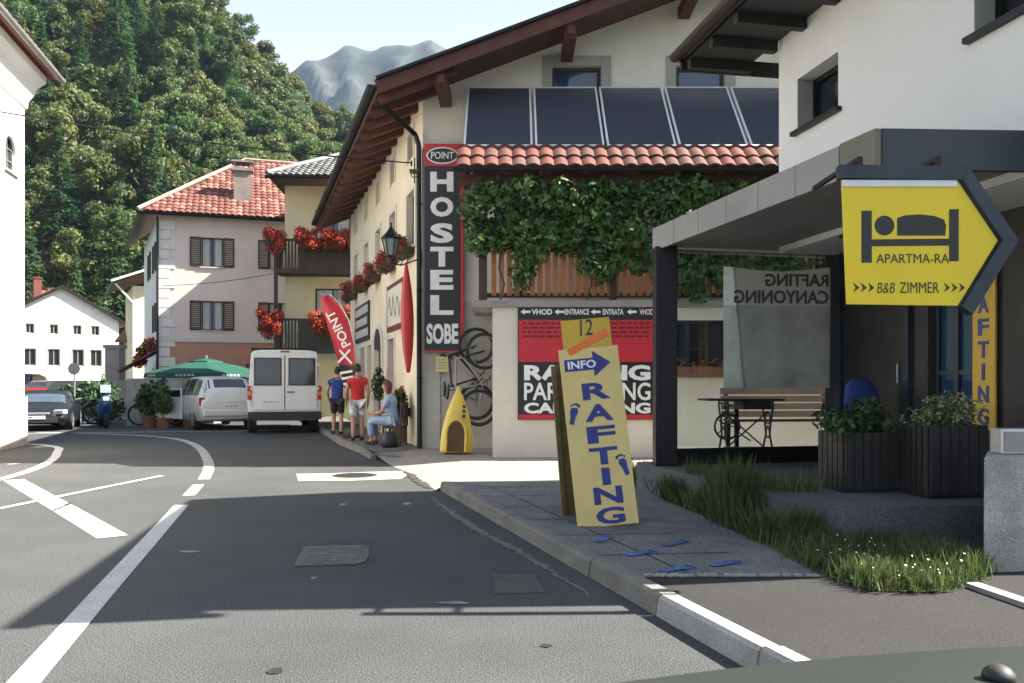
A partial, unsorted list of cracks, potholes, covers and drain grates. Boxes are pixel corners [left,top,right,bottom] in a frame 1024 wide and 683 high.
manhole cover [294,545,369,566]
